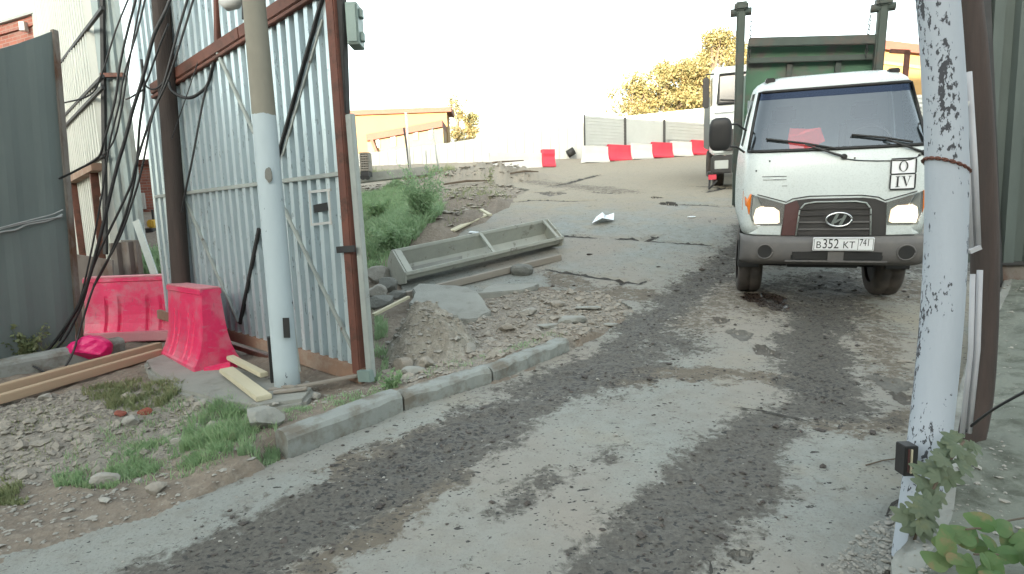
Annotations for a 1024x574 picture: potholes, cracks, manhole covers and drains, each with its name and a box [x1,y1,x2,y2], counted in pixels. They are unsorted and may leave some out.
crack [564,235,712,246]
pothole [740,292,790,312]
crack [545,269,647,285]
pothole [752,344,780,358]
pothole [725,329,754,341]
crack [522,175,613,202]
